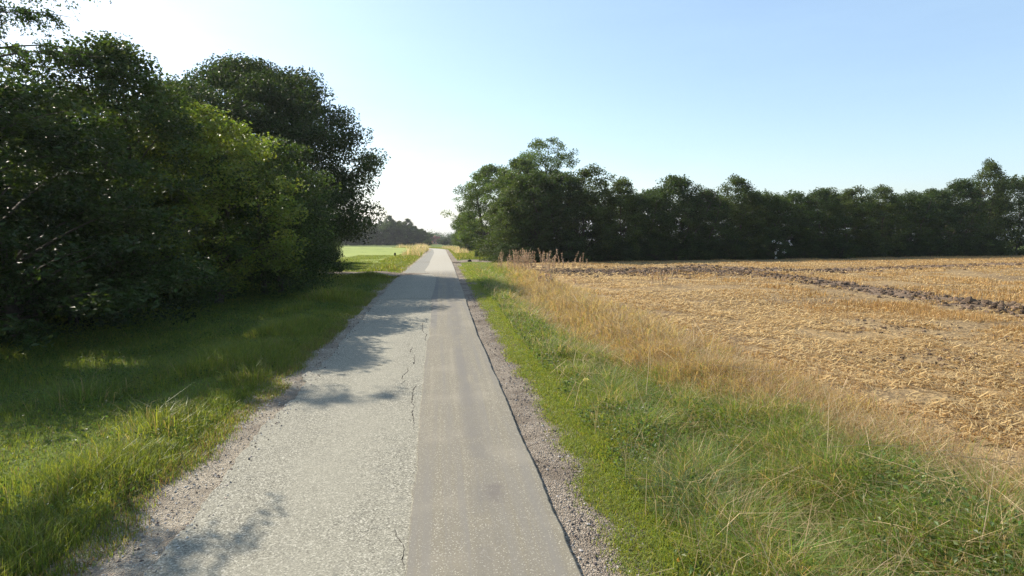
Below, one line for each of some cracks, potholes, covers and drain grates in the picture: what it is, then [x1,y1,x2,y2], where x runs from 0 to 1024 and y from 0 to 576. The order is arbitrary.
crack [401,321,427,424]
